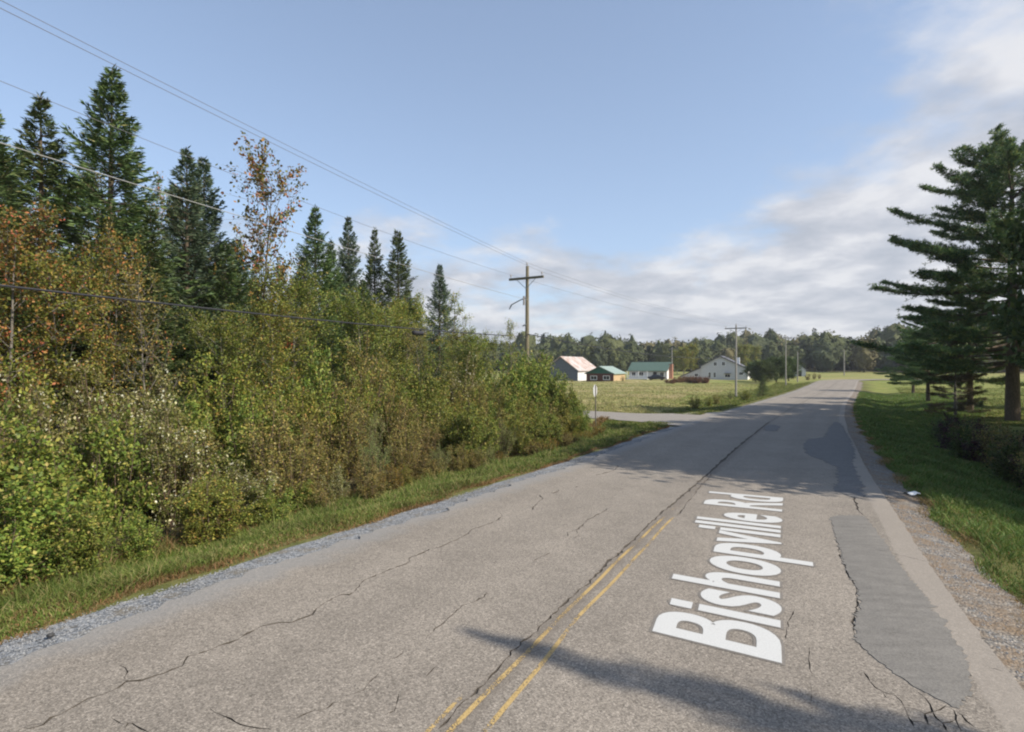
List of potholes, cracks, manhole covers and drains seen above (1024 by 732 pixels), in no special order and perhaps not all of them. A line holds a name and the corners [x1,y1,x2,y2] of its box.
crack [864,673,974,731]
crack [838,547,861,646]
crack [17,514,503,732]
